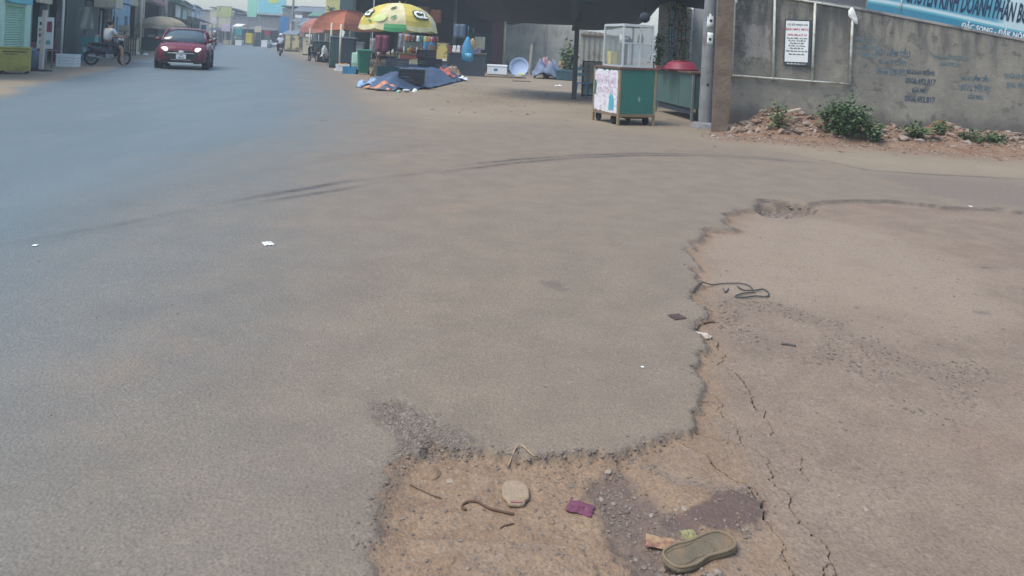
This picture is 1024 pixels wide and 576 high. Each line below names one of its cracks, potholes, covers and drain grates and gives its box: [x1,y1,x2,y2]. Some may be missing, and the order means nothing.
crack [673,330,845,576]
pothole [750,200,824,219]
pothole [363,441,764,576]
